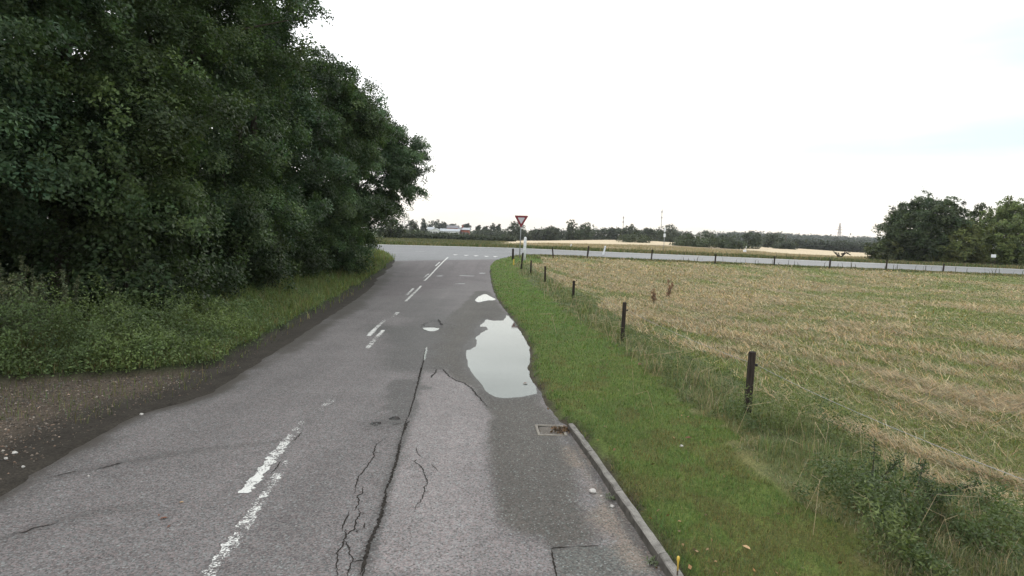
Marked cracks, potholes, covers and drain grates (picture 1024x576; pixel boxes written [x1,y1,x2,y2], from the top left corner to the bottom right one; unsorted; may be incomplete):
crack [336,441,381,576]
crack [414,448,438,509]
drain grate [535,424,568,436]
pothole [378,413,412,424]
pothole [409,318,461,333]
crack [431,369,487,407]
